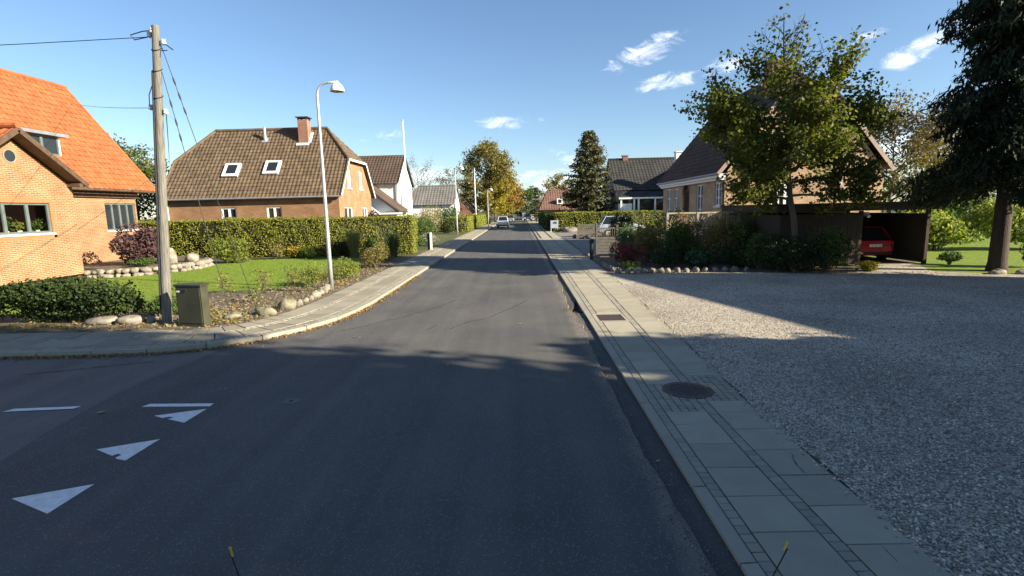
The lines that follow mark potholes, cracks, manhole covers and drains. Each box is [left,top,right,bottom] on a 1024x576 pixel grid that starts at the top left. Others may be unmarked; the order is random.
manhole cover [662,382,714,399]
